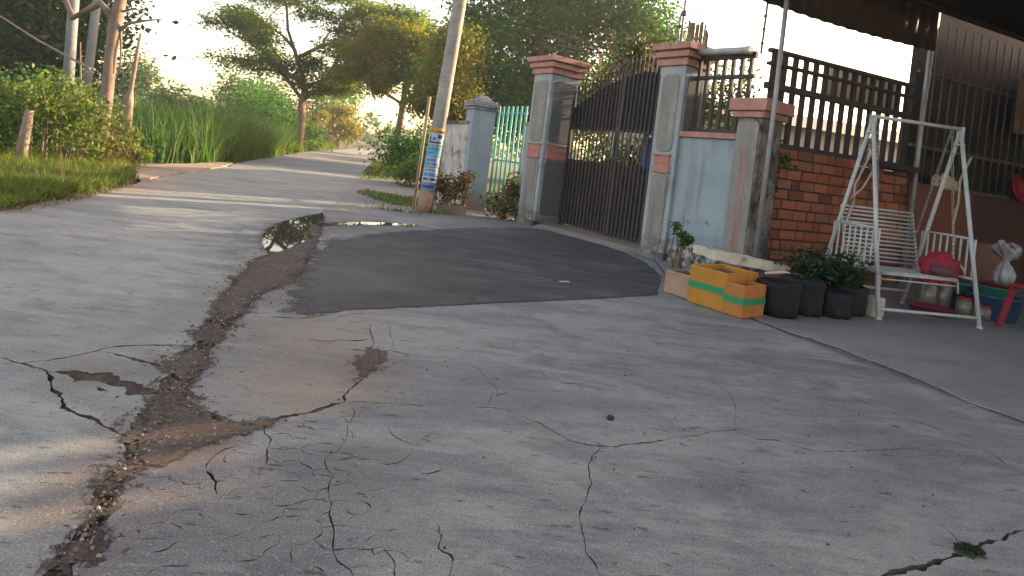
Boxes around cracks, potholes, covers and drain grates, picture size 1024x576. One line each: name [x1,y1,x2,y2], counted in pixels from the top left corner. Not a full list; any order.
crack [147,327,395,576]
crack [886,531,1021,576]
crack [11,355,160,426]
